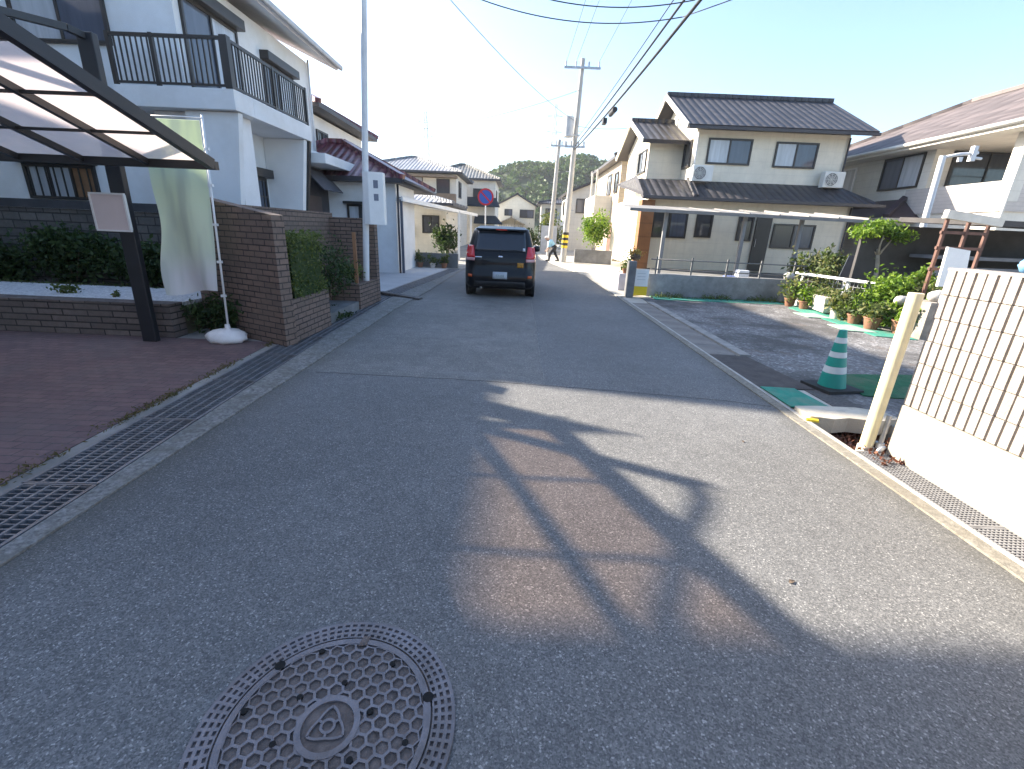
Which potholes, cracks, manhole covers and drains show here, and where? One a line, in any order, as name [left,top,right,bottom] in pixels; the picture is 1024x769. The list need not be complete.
drain grate [22,418,197,485]
drain grate [969,526,1024,562]
drain grate [0,483,97,548]
manhole cover [178,622,455,769]
drain grate [142,380,257,420]
drain grate [856,451,1005,528]
drain grate [260,336,324,356]
drain grate [212,354,296,381]
